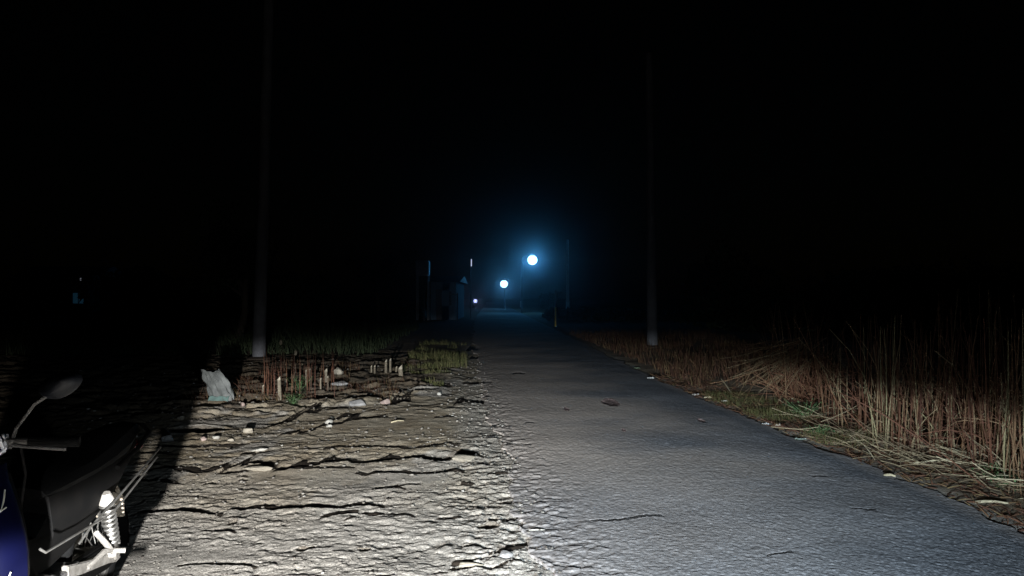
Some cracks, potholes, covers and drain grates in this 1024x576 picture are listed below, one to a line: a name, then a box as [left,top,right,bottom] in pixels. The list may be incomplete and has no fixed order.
crack [128,376,534,533]
crack [433,544,526,574]
